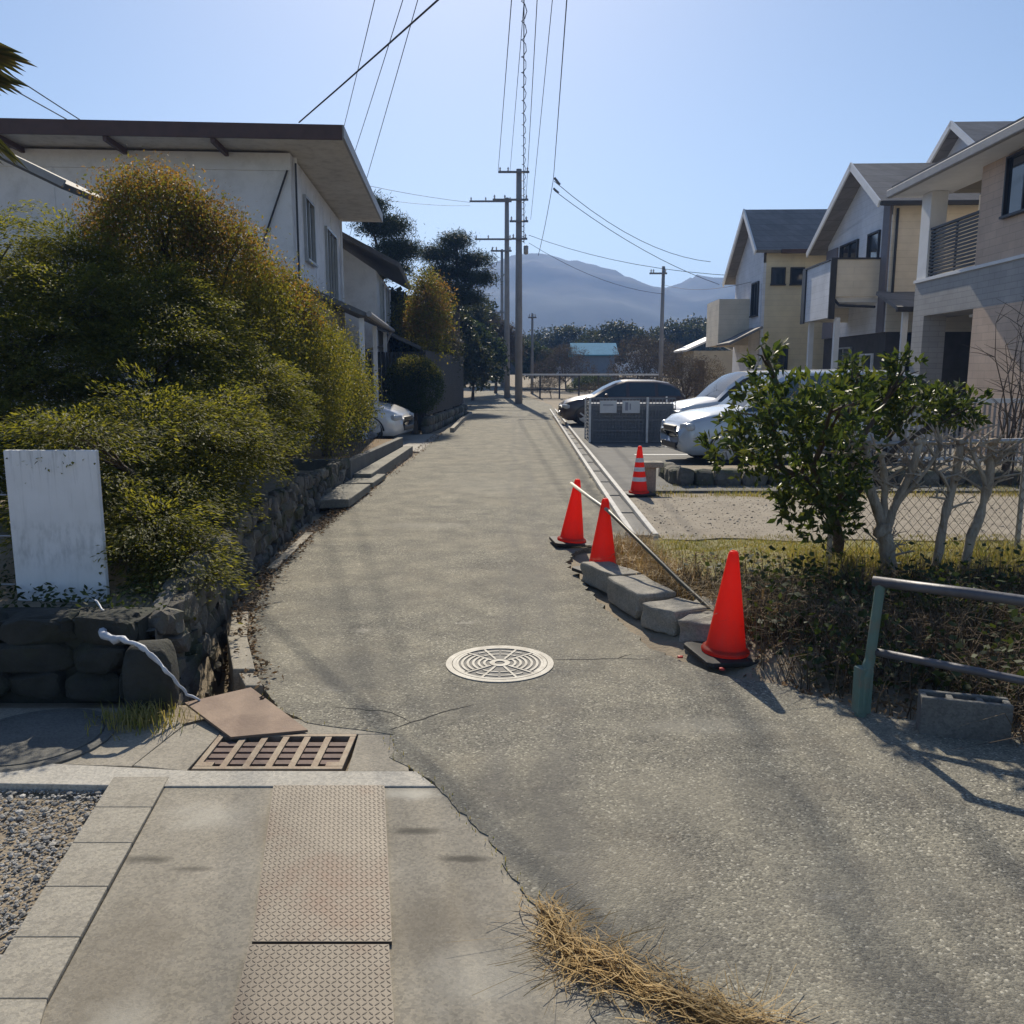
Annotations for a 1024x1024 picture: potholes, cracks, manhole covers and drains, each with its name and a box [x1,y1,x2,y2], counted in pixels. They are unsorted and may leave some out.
crack [332,704,474,730]
manhole cover [446,645,554,683]
drain grate [191,734,357,771]
